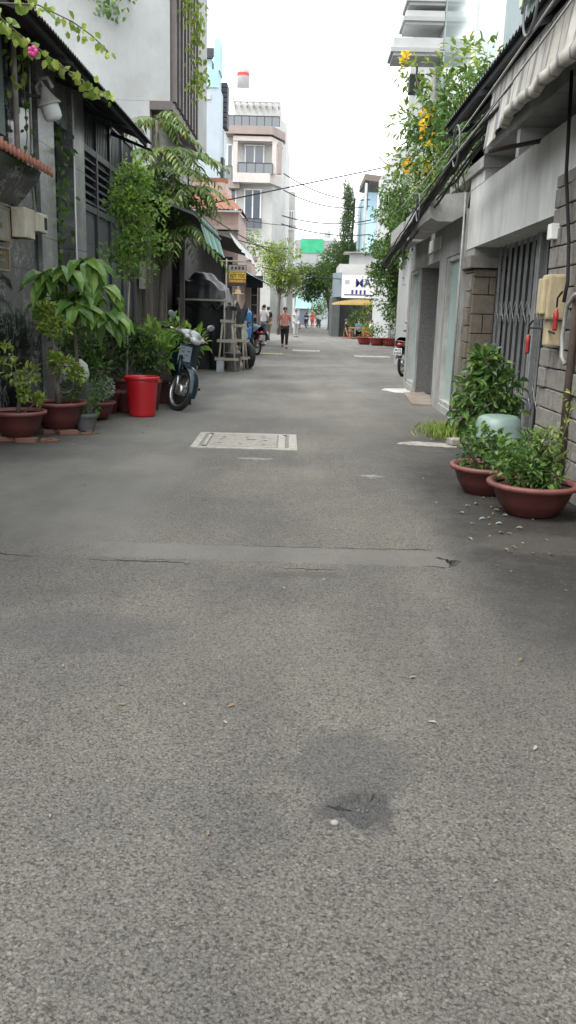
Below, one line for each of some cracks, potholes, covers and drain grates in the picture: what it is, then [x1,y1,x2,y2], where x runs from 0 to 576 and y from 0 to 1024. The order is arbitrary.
manhole cover [190,432,298,451]
pothole [325,793,388,830]
